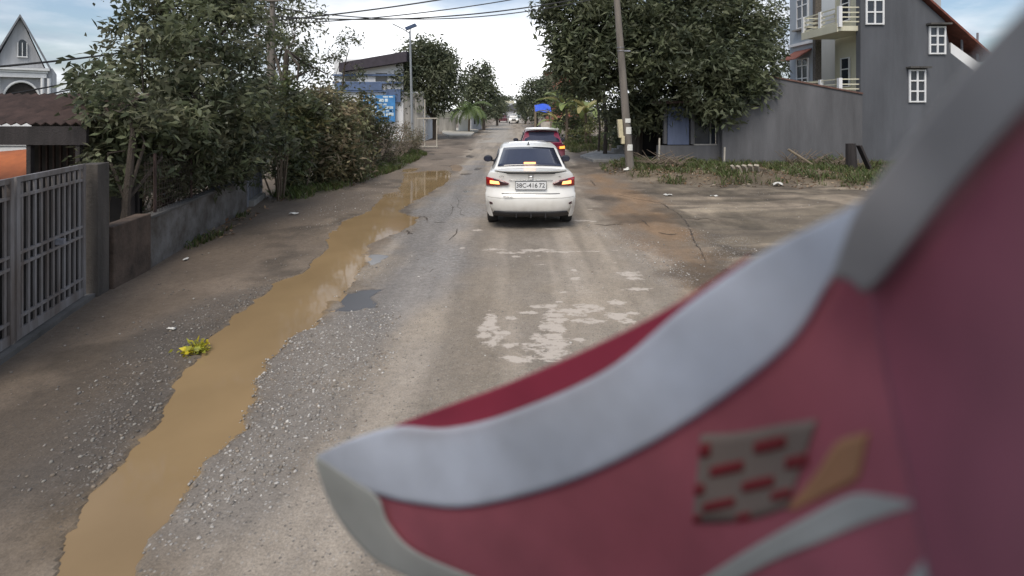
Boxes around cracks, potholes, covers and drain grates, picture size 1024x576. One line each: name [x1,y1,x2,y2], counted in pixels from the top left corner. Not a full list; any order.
crack [621,195,712,262]
pothole [52,170,452,576]
